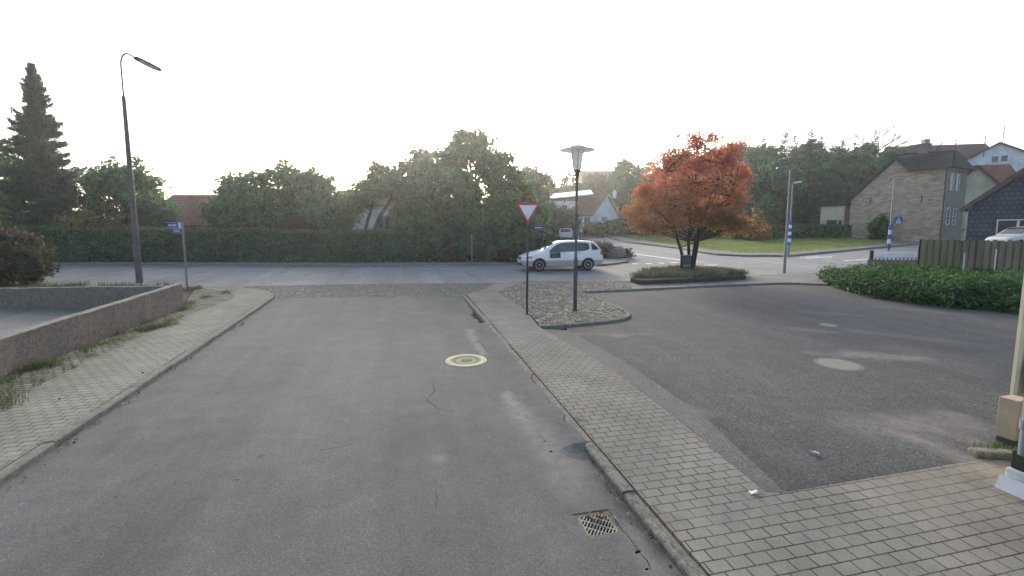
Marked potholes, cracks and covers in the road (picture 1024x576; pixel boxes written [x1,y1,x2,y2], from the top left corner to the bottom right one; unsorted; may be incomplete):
manhole cover [444,354,488,368]
drain grate [573,510,625,540]
manhole cover [813,358,865,371]
